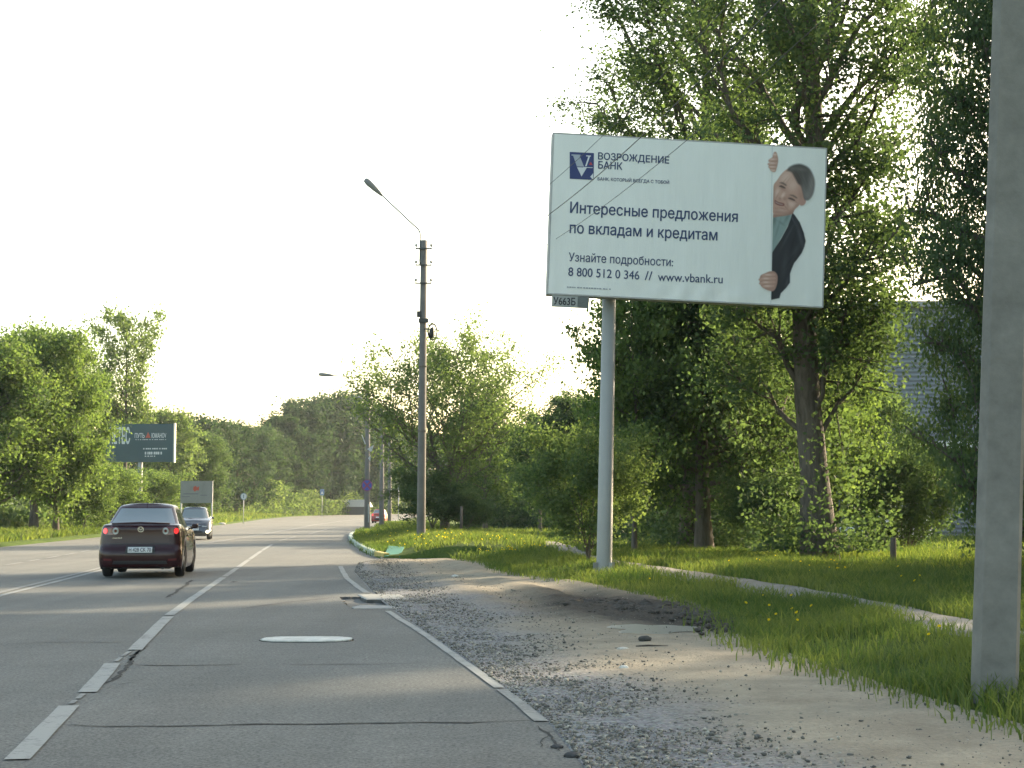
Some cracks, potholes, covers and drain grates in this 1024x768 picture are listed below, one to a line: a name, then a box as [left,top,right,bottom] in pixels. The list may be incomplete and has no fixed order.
crack [0,641,242,684]
crack [165,564,331,598]
